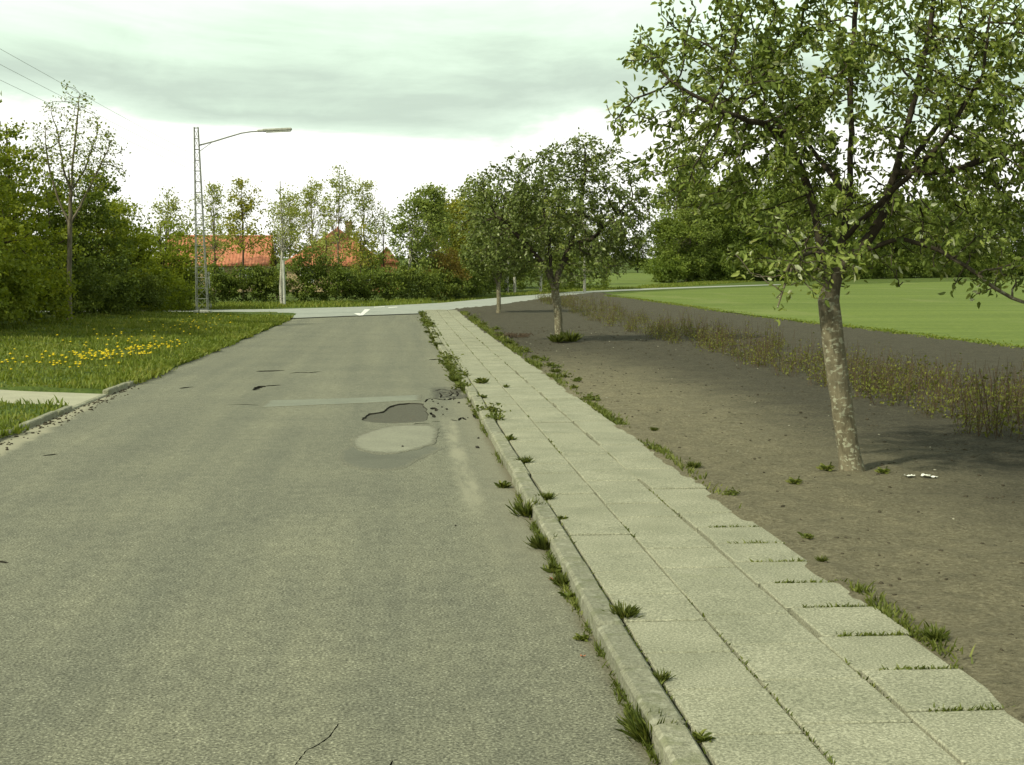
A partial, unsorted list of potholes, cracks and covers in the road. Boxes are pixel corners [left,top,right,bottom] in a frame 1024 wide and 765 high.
pothole [362,403,429,423]
crack [295,723,339,765]
